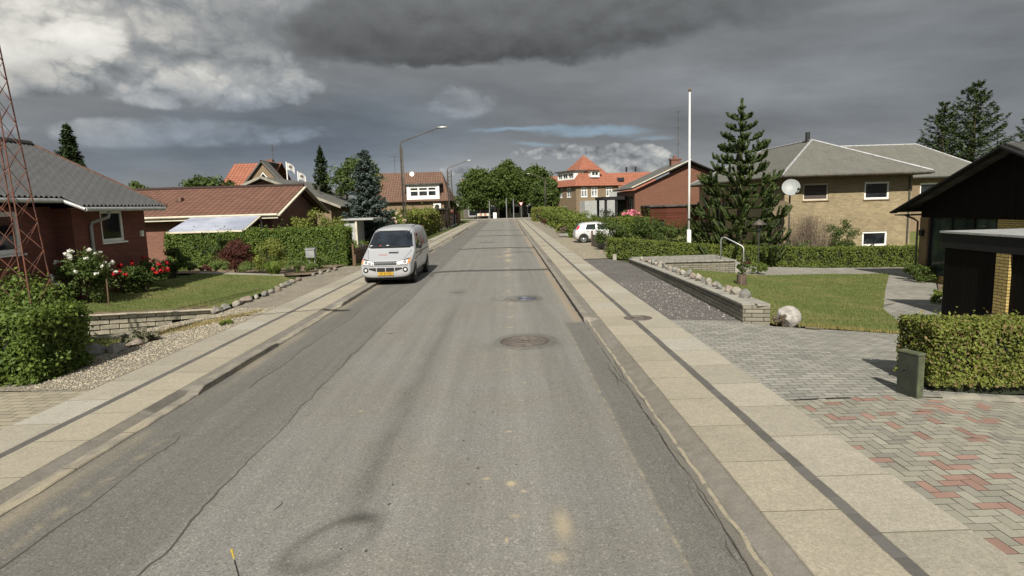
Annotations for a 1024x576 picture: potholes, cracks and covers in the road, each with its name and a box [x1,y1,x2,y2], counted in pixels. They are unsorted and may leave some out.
manhole cover [500,336,549,347]
crack [0,434,186,569]
crack [609,360,754,576]
